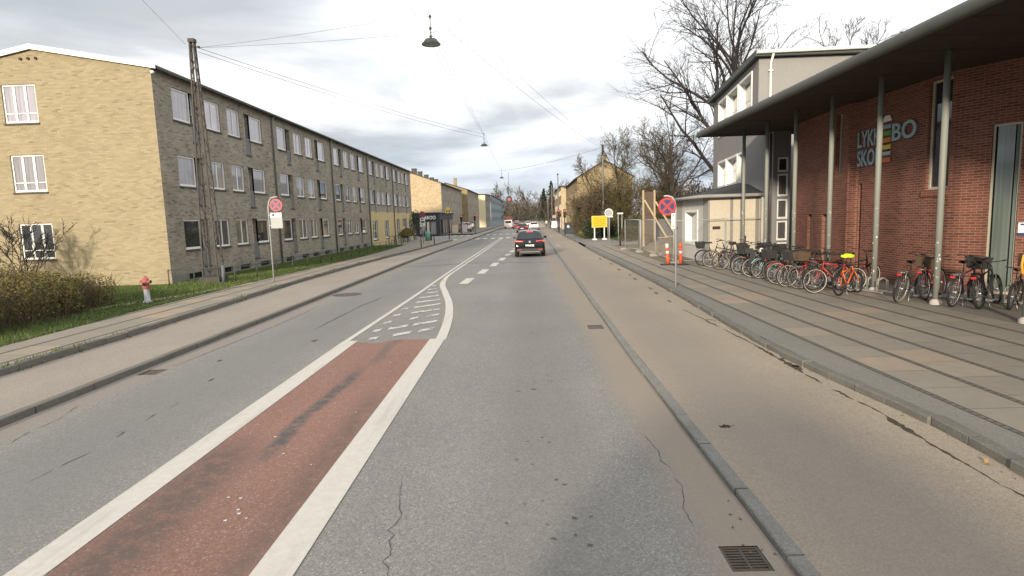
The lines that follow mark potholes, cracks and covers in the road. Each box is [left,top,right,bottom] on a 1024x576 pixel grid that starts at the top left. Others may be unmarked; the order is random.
crack [382,481,402,576]
drain grate [719,546,774,572]
